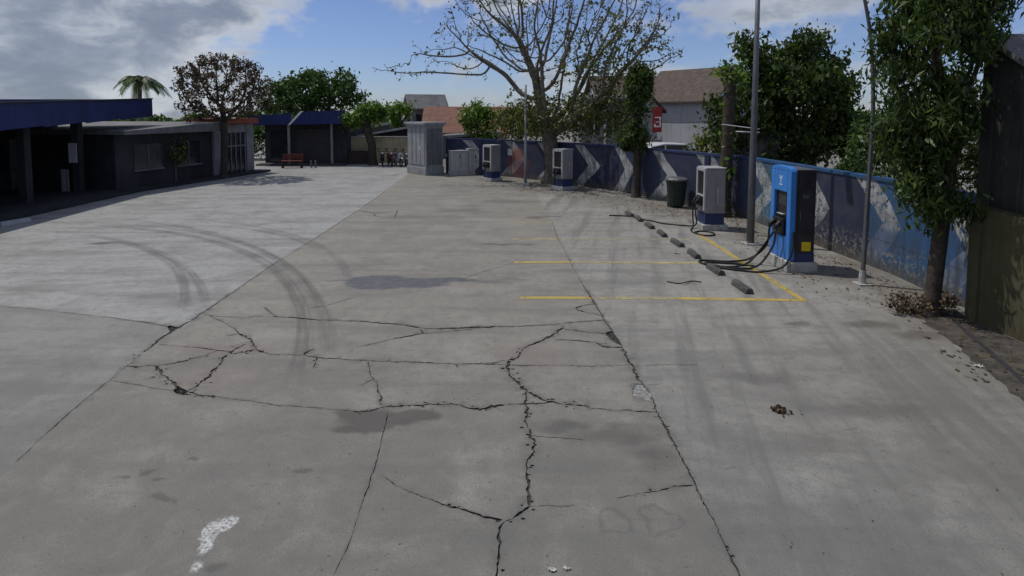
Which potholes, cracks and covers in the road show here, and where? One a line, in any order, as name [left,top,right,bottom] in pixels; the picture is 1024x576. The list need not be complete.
crack [116,298,654,576]
crack [619,485,693,498]
